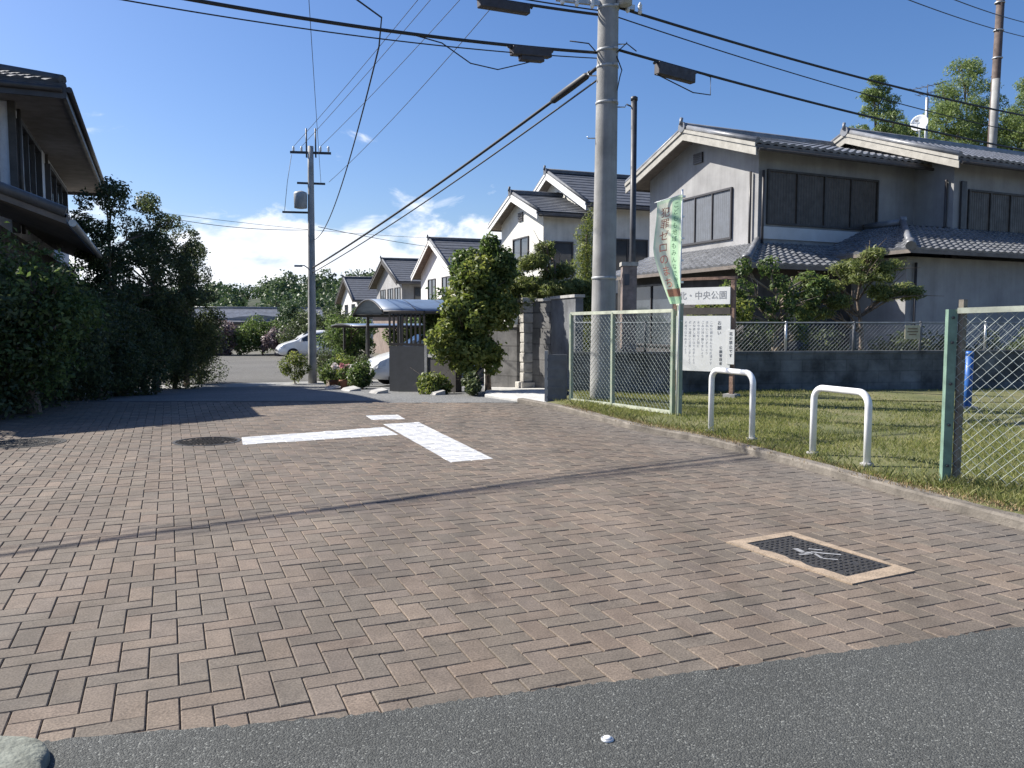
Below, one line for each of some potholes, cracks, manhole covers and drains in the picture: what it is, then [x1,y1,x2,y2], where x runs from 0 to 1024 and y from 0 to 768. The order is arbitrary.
utility cover [726,531,915,585]
manhole cover [172,436,241,447]
manhole cover [0,438,67,449]
